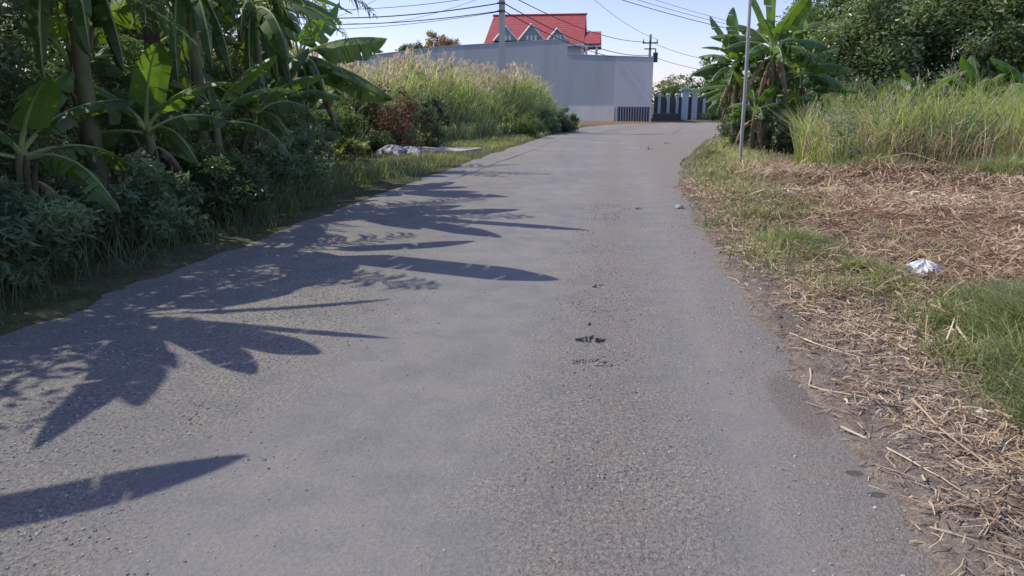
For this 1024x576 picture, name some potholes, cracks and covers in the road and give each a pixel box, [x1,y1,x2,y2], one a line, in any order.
pothole [575,335,609,344]
